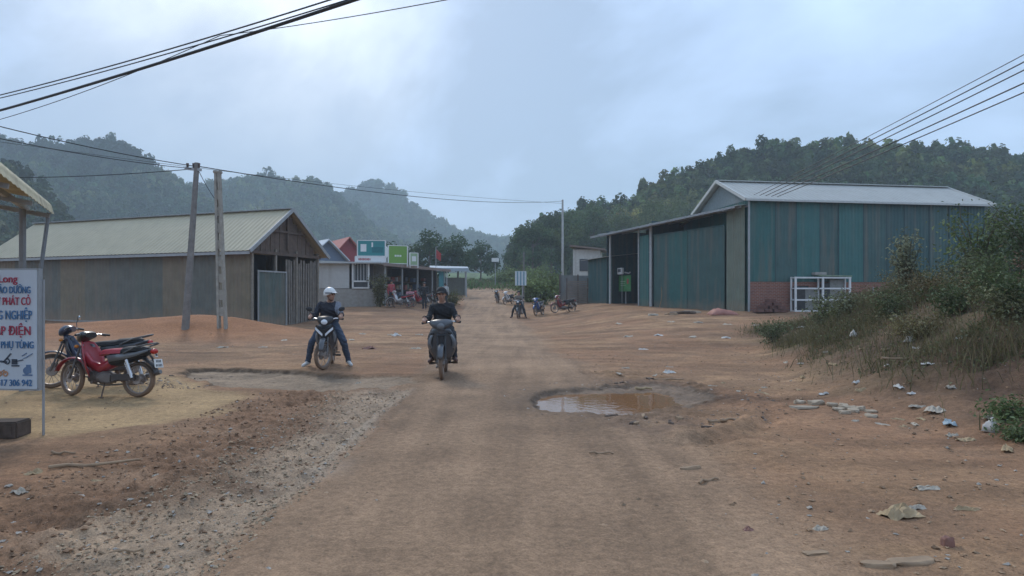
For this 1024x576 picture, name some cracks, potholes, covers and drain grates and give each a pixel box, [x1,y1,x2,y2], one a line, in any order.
pothole [492,379,751,421]
